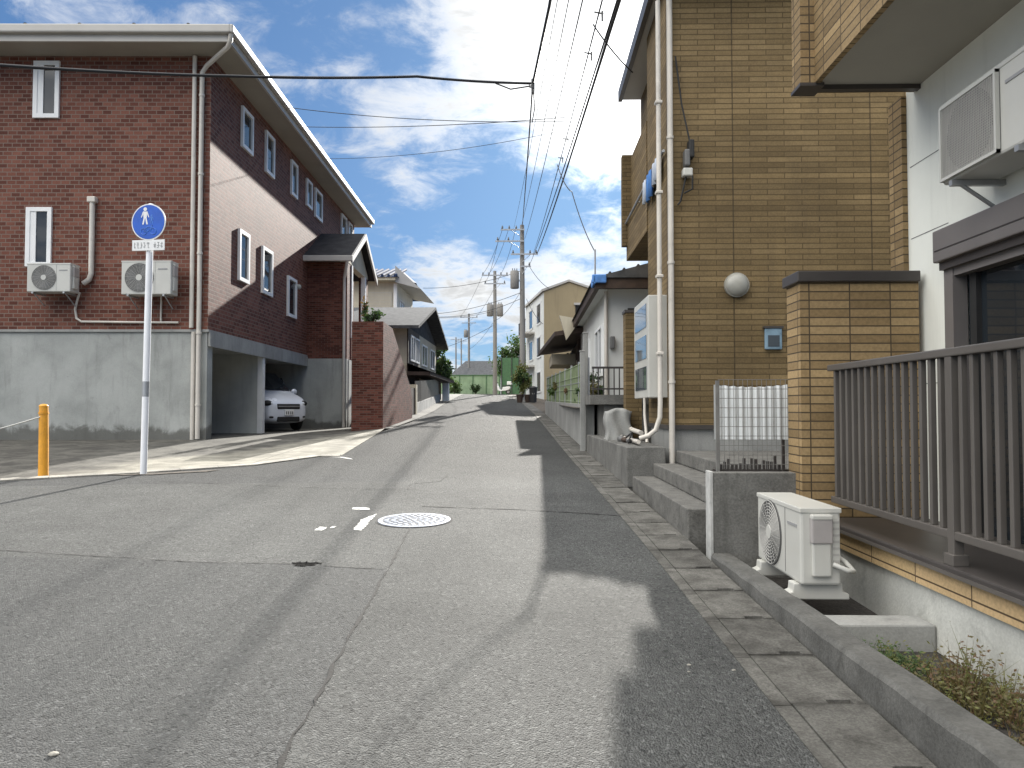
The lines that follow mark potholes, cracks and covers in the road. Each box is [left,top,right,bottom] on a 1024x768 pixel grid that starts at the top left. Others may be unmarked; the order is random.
manhole cover [376,513,453,528]
